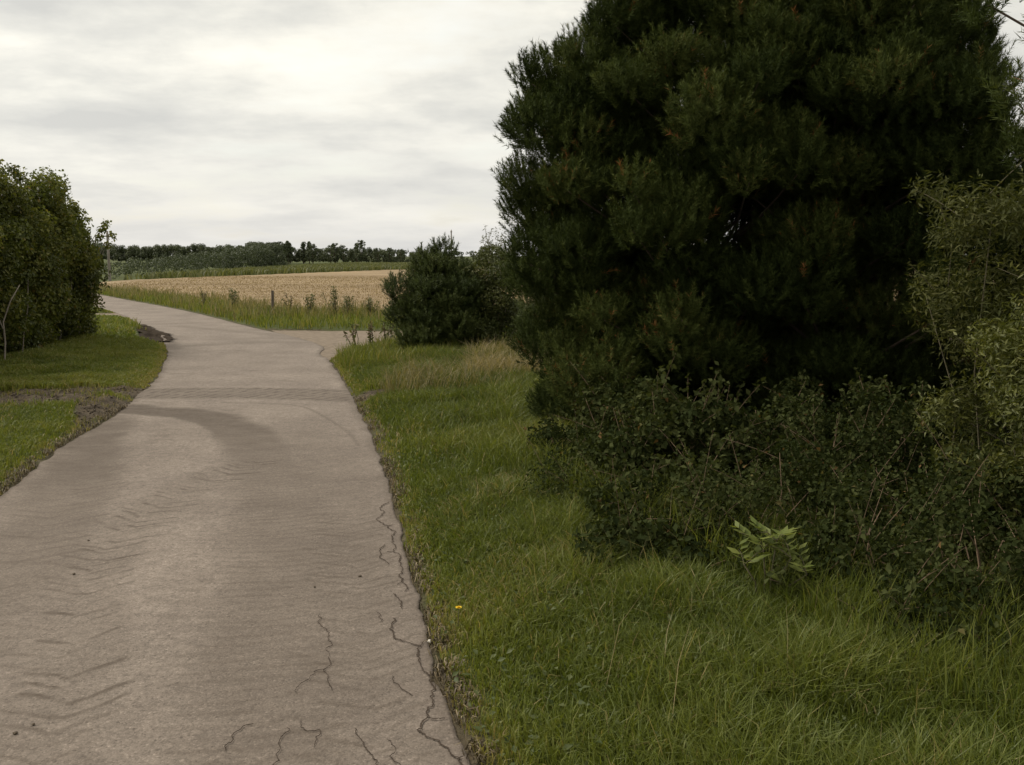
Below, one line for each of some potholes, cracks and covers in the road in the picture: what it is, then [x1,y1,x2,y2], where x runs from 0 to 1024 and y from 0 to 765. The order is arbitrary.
crack [273,722,321,765]
crack [376,502,463,765]
crack [355,728,401,765]
crack [295,614,332,692]
